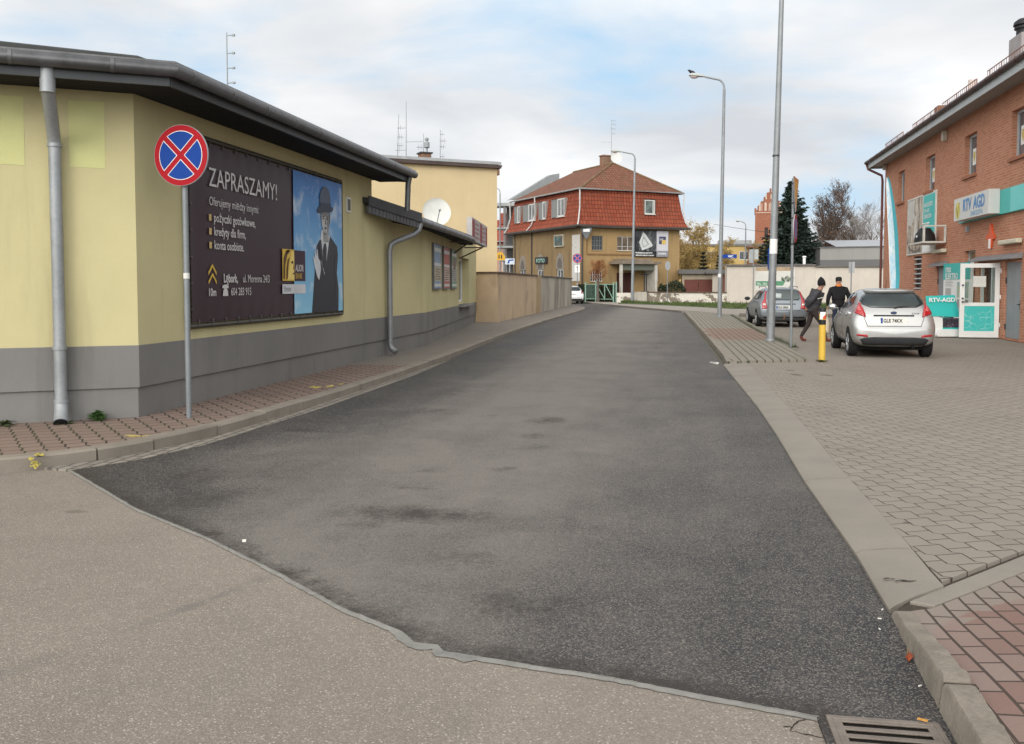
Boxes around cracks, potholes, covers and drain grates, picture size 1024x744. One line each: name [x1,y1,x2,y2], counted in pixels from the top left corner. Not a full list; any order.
crack [783,719,824,738]
drain grate [826,714,951,744]
